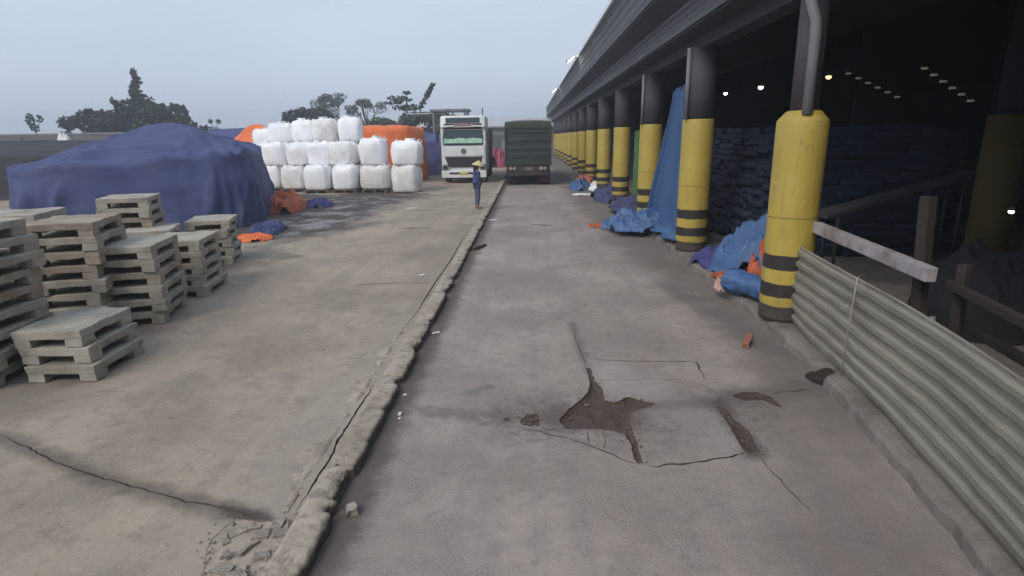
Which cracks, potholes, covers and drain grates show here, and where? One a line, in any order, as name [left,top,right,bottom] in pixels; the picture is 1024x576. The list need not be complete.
pothole [709,404,768,453]
pothole [196,511,298,576]
crack [3,435,265,521]
crack [296,386,373,511]
pothole [732,392,781,407]
pothole [805,368,835,385]
pothole [559,367,661,464]
pothole [518,411,545,430]
crack [513,332,812,513]
